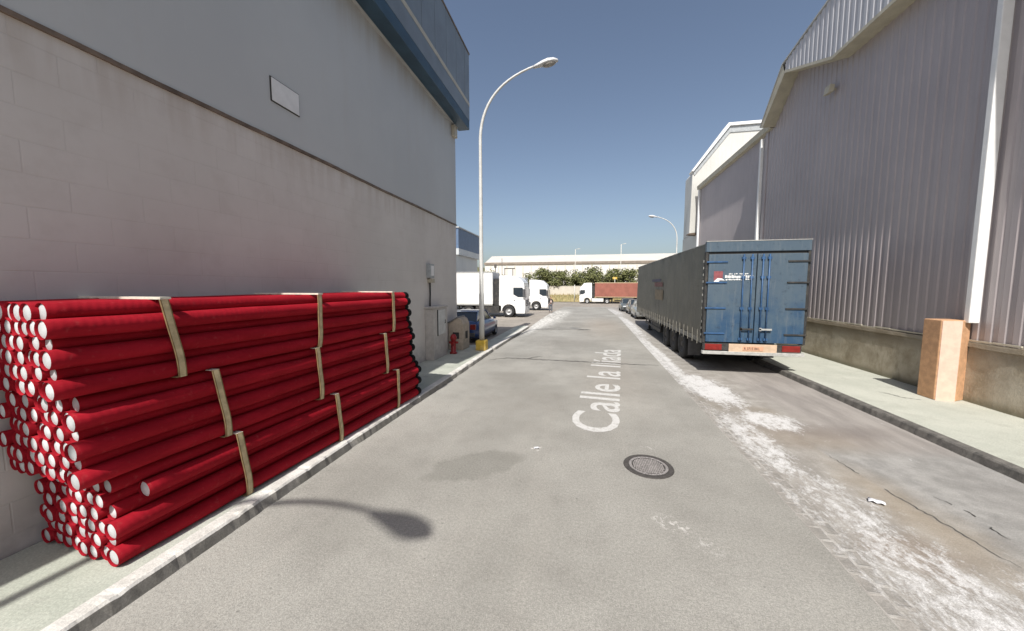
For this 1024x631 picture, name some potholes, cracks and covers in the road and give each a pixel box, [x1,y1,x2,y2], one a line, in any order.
manhole cover [623,454,674,479]
